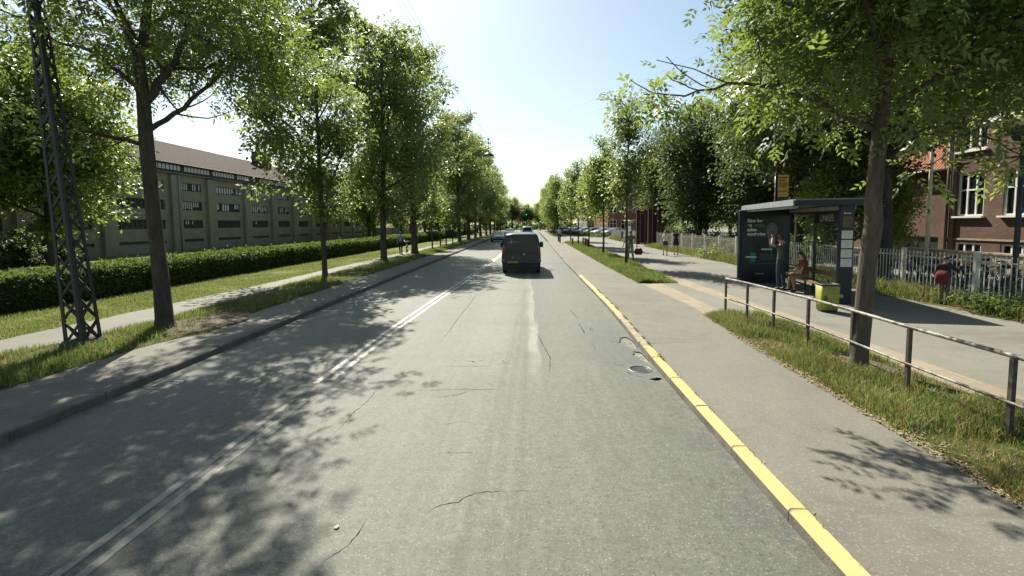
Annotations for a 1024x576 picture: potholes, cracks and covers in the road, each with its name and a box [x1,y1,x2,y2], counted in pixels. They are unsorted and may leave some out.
manhole cover [628,365,652,373]
crack [428,490,526,513]
